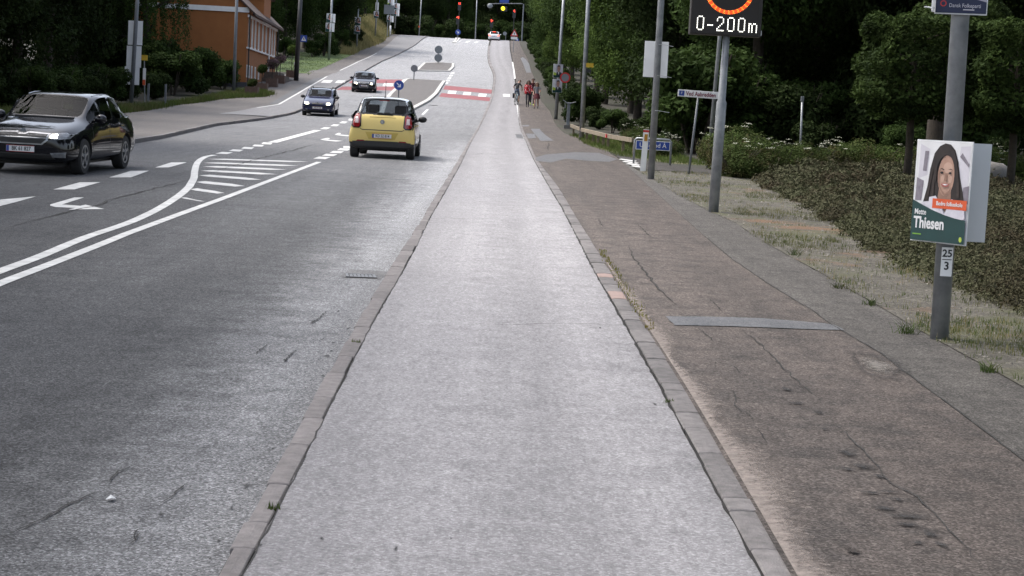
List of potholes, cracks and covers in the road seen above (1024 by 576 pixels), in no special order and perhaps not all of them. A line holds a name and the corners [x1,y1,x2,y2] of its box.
crack [528,140,796,576]
crack [701,328,819,398]
crack [3,464,136,537]
crack [833,421,979,563]
